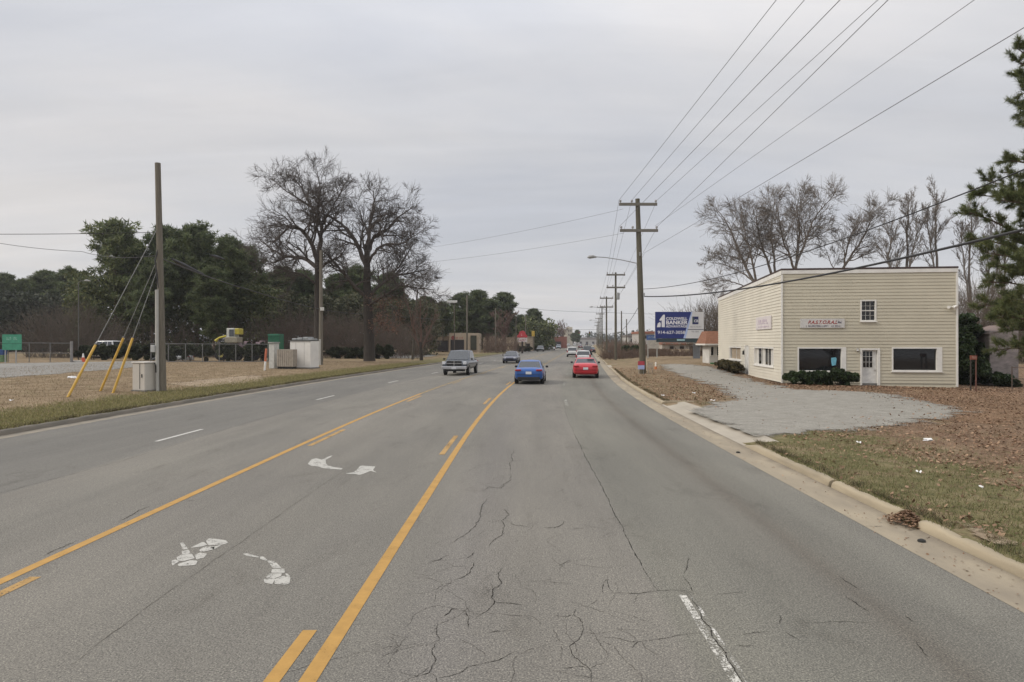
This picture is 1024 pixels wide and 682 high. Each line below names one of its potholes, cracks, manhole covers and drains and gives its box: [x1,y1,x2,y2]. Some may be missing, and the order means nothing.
crack [287,444,869,682]
